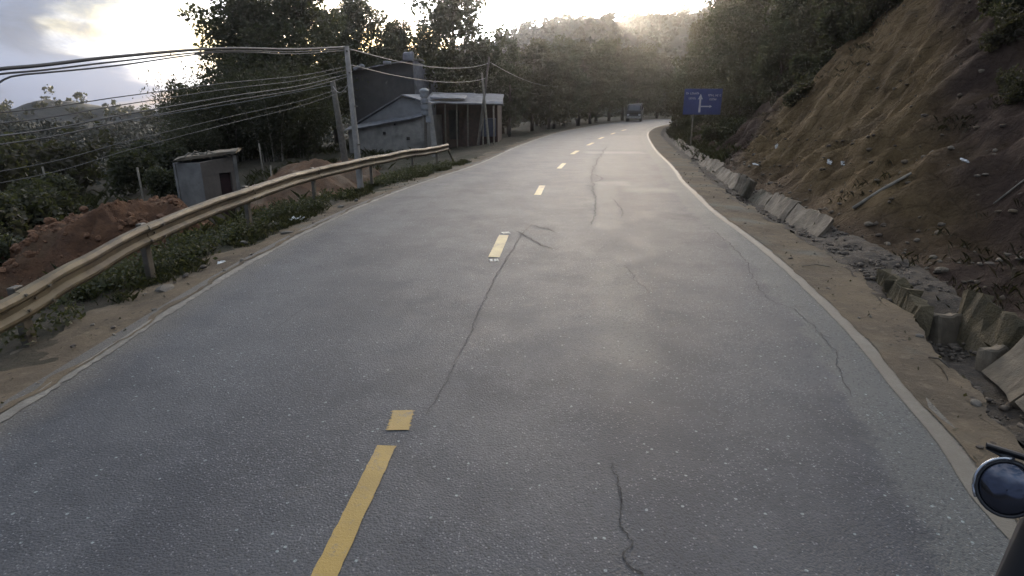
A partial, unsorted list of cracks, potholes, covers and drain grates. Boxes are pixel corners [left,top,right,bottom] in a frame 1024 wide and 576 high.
crack [611,464,644,576]
crack [588,147,607,224]
